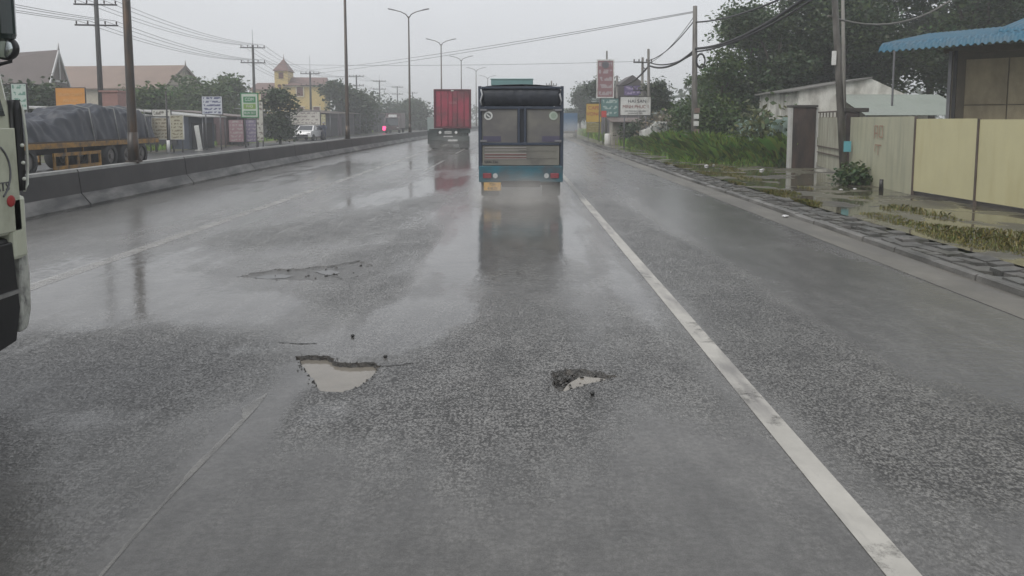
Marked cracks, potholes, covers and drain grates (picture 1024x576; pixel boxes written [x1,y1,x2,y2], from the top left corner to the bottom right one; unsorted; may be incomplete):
pothole [547,367,621,393]
pothole [295,354,381,393]
pothole [238,261,373,281]
